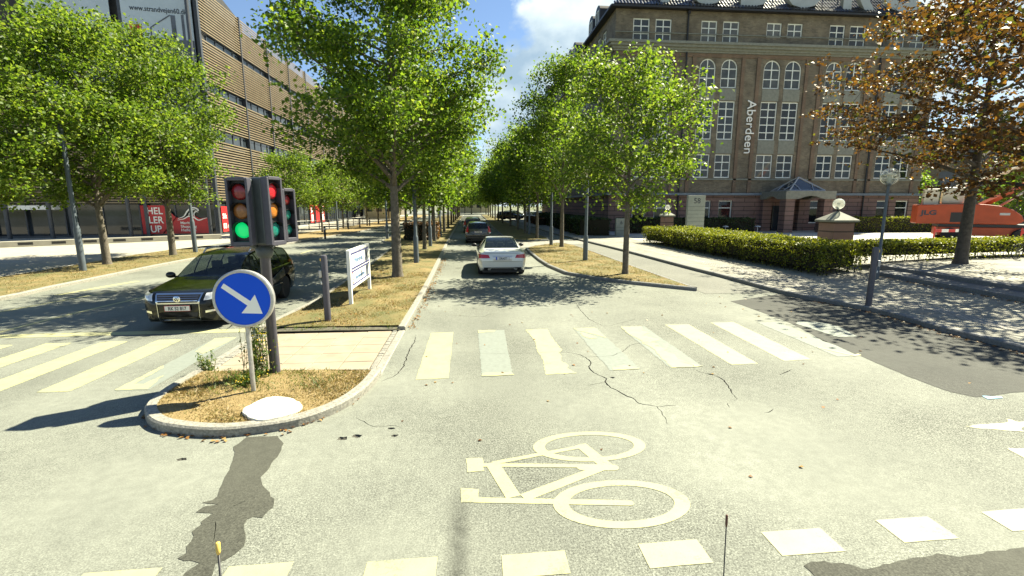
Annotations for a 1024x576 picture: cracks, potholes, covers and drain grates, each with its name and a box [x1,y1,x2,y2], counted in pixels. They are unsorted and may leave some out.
manhole cover [242,396,302,421]
crack [567,343,672,423]
